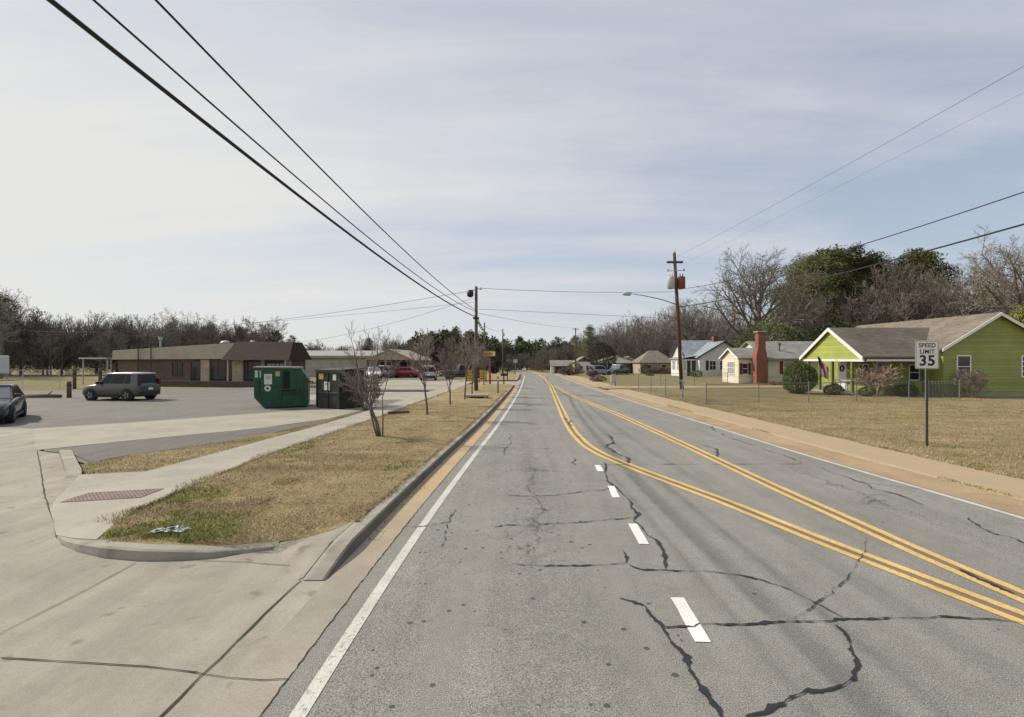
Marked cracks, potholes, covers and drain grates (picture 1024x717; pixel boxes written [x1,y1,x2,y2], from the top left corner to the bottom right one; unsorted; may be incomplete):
crack [482,418,1024,717]
